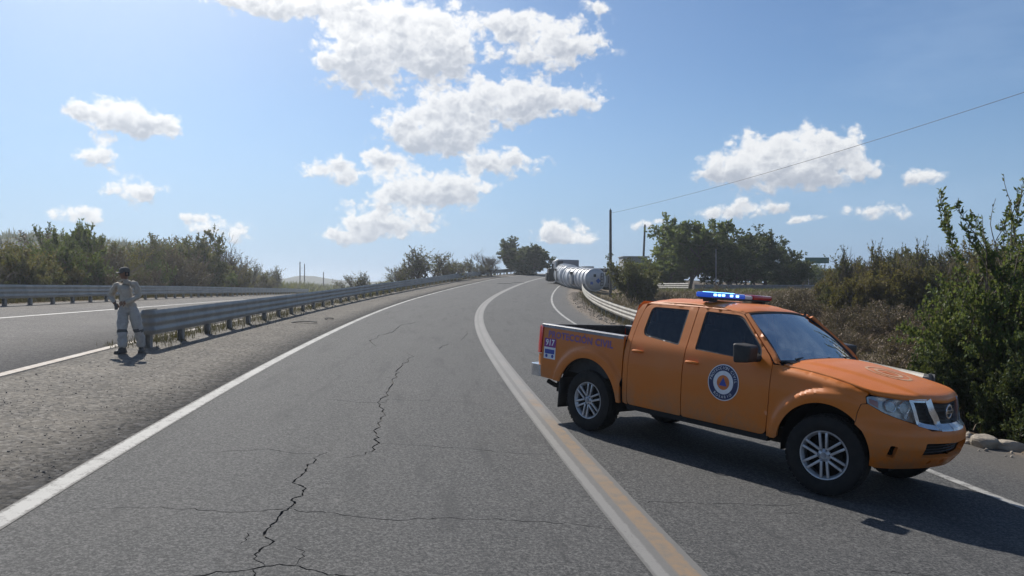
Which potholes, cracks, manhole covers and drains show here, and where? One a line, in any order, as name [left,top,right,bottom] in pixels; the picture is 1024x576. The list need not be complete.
crack [75,449,615,576]
